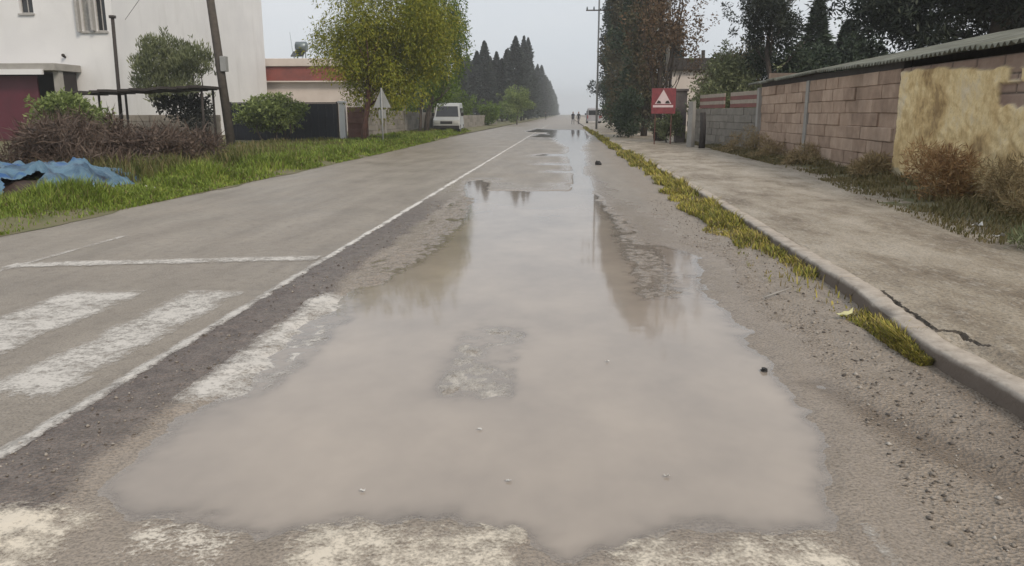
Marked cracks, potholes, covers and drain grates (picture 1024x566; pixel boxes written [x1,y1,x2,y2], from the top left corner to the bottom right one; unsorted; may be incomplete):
pothole [13,179,909,566]
crack [880,290,991,347]
